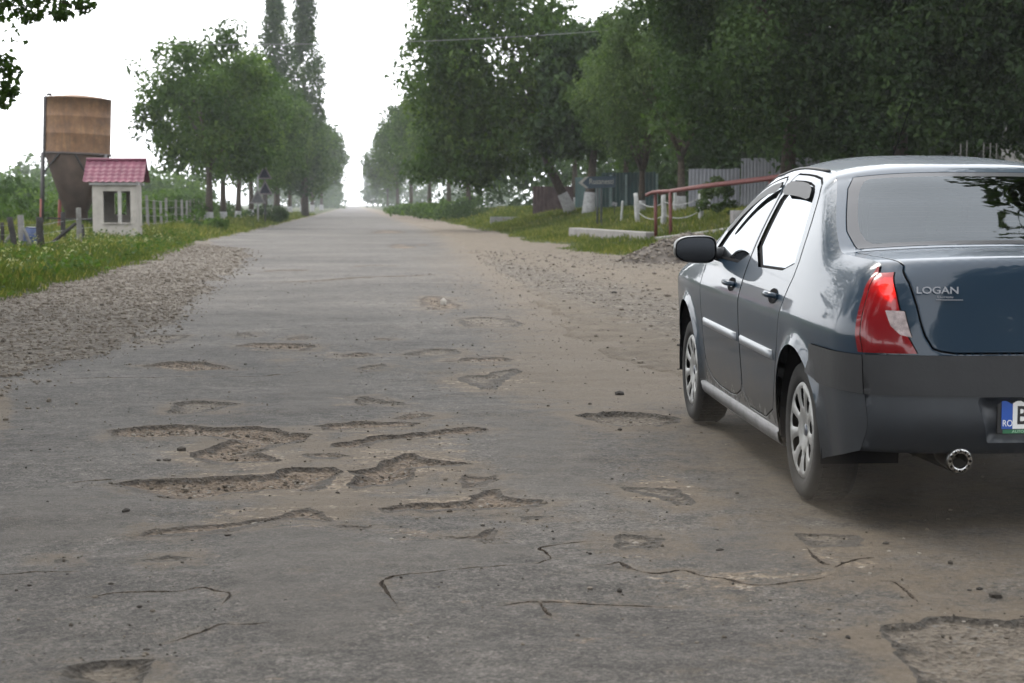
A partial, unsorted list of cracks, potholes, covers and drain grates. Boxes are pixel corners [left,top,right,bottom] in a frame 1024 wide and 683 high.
crack [168,622,268,643]
pothole [457,368,522,390]
pothole [236,343,318,351]
pothole [107,424,313,465]
pothole [141,361,231,371]
pothole [378,489,548,514]
pothole [418,296,463,310]
pothole [620,487,696,506]
crack [84,587,232,604]
pothole [879,616,1024,683]
pothole [164,400,241,415]
pothole [576,411,682,427]
